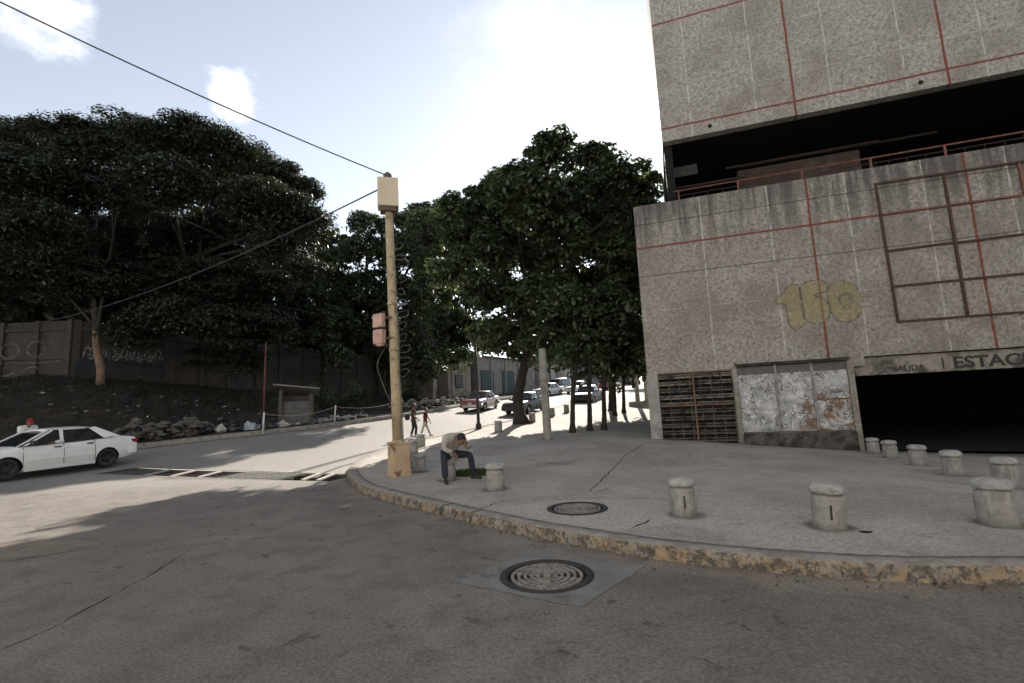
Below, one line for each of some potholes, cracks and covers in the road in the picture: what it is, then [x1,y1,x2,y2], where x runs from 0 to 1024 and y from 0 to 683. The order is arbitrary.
manhole cover [547,502,608,516]
crack [1,547,195,650]
drain grate [97,468,347,481]
